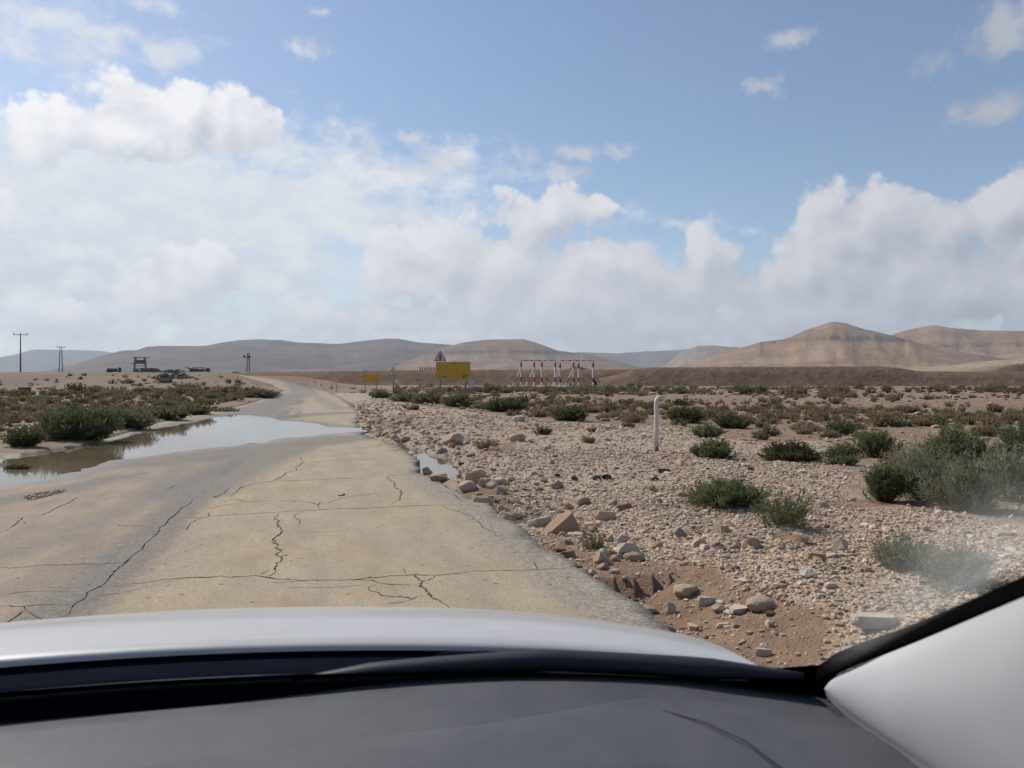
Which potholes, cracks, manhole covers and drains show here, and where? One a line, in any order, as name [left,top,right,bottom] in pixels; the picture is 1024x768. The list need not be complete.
crack [2,445,567,622]
pothole [24,490,65,501]
